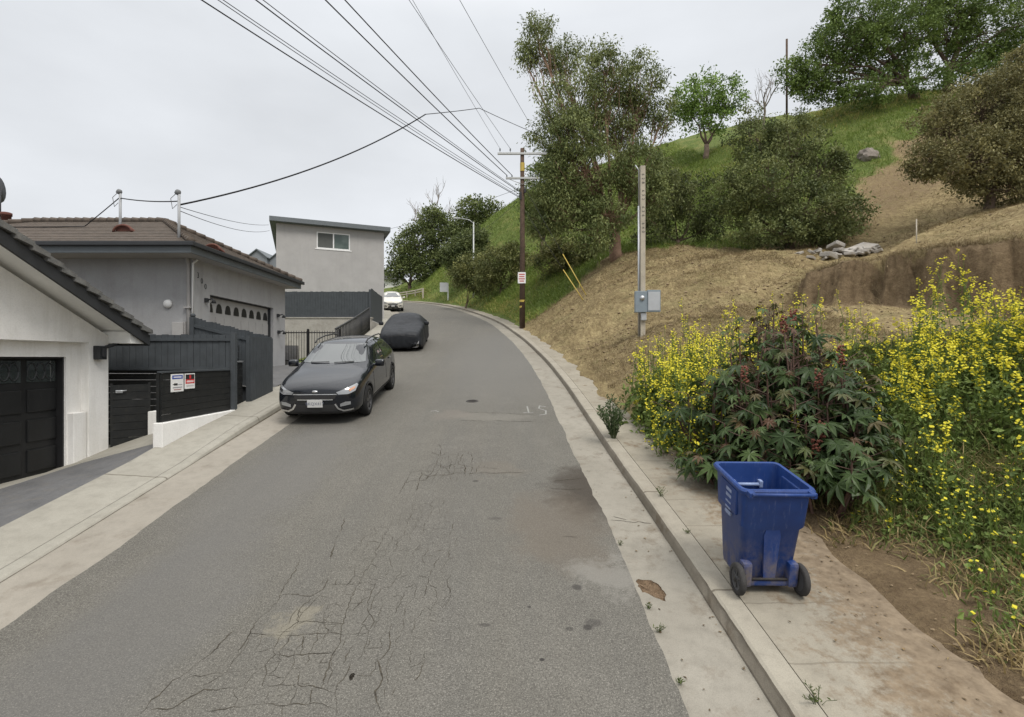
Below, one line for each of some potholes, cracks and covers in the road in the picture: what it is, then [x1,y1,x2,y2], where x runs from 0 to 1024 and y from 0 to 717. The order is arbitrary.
crack [146,500,457,715]
crack [400,446,521,491]
